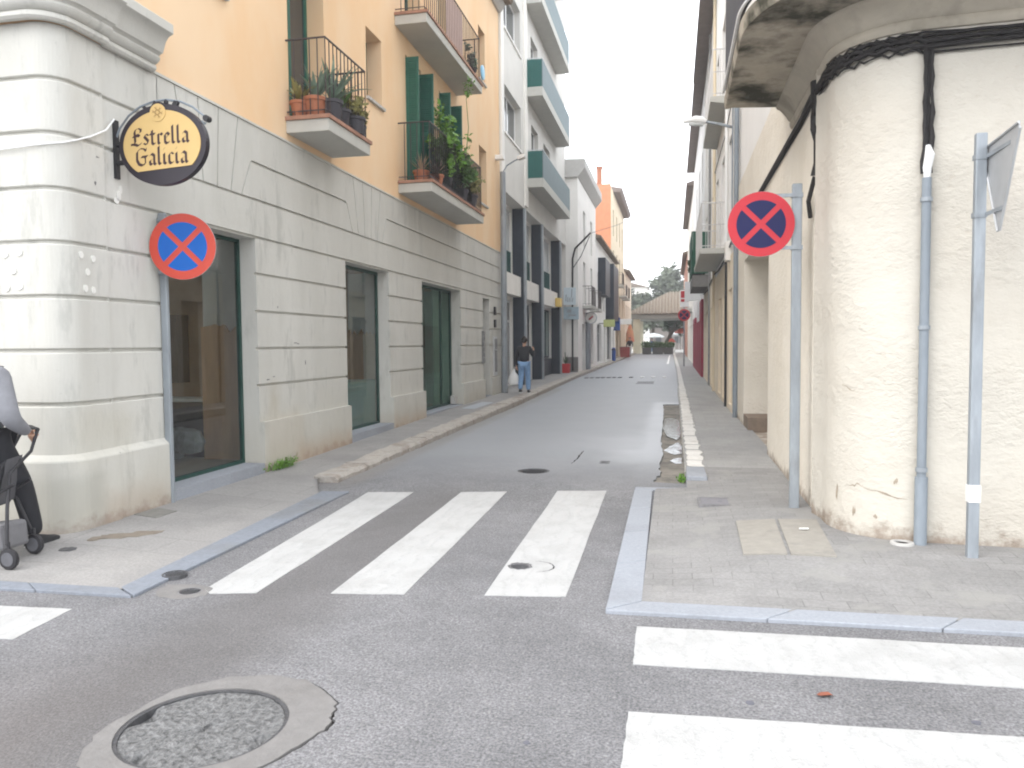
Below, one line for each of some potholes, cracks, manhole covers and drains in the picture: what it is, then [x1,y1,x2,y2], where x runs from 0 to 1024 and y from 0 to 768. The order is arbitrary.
manhole cover [76,675,337,768]
manhole cover [162,570,188,581]
